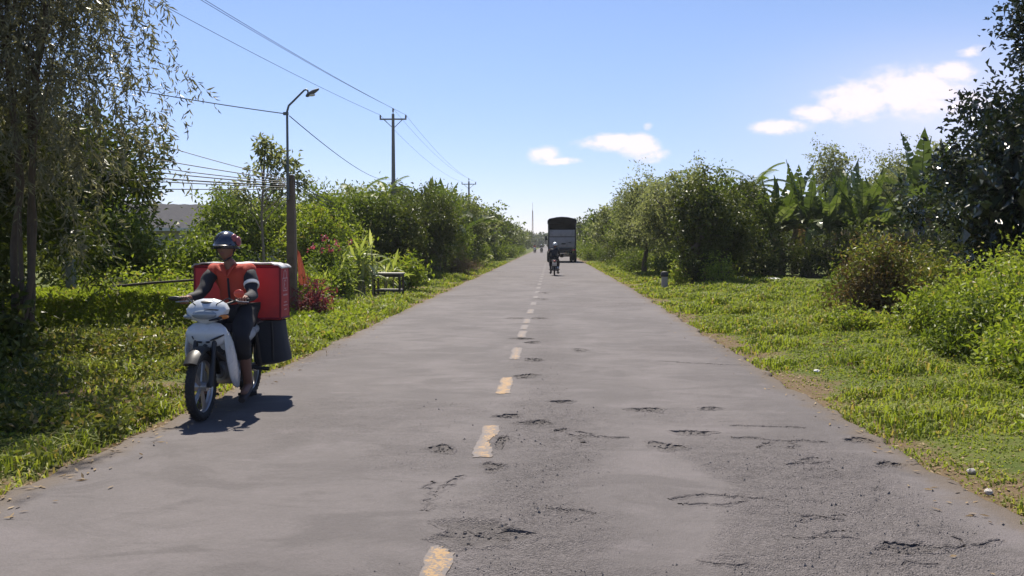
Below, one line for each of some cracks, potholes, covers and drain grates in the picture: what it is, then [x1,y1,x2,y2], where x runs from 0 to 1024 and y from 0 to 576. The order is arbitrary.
crack [877,536,1007,569]
pothole [870,460,908,469]
pothole [476,461,510,474]
pothole [420,443,458,455]
pothole [839,435,881,444]
crack [565,431,630,443]
crack [728,424,836,471]
crack [668,492,862,541]
crack [417,474,467,511]
pothole [419,516,546,552]
pothole [643,440,693,453]
pothole [489,434,515,451]
